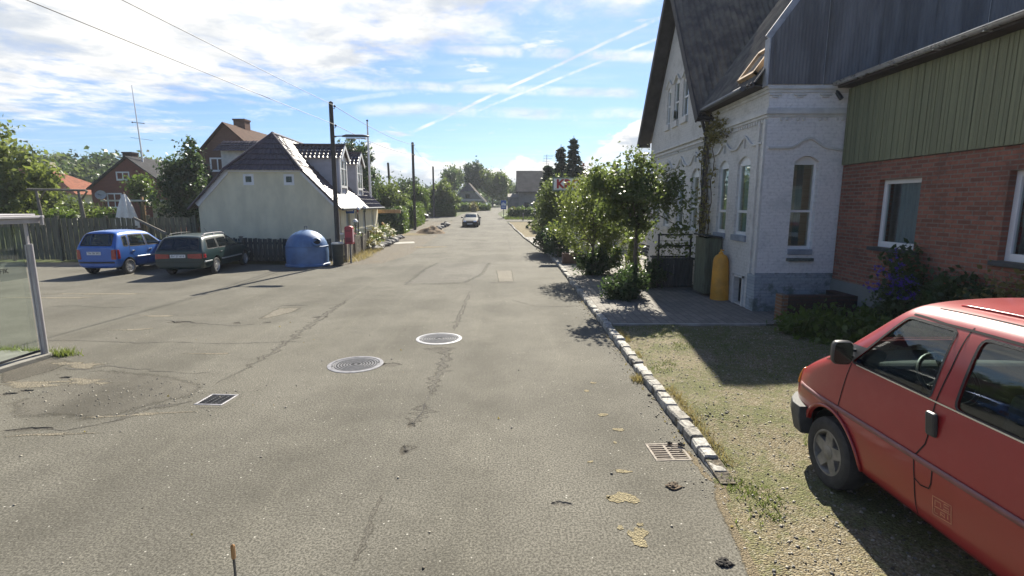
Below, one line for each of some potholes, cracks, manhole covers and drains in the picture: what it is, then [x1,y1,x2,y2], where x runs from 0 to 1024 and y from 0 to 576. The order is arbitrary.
crack [406,347,452,425]
drain grate [645,443,692,461]
manhole cover [327,356,384,373]
manhole cover [416,333,462,345]
drain grate [194,394,239,405]
